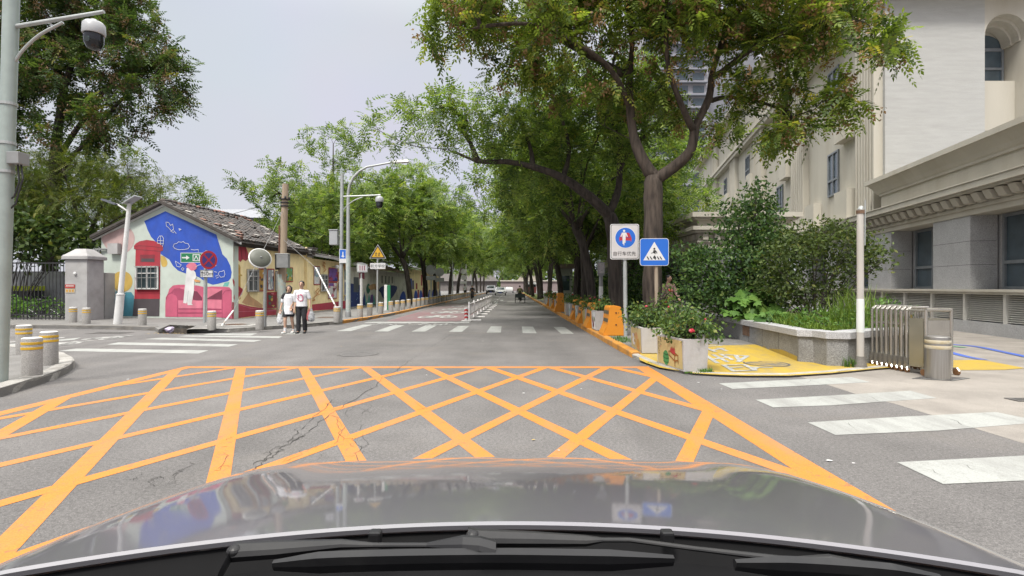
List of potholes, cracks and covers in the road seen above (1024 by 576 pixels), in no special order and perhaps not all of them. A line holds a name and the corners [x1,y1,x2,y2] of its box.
crack [252,334,451,470]
